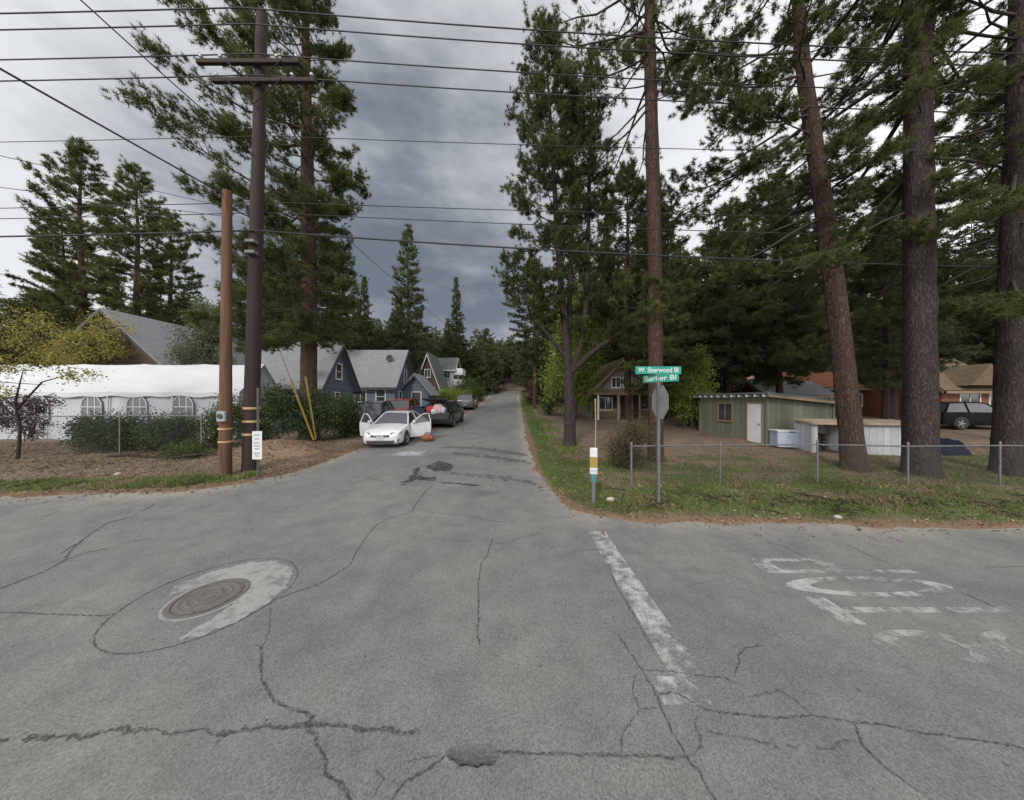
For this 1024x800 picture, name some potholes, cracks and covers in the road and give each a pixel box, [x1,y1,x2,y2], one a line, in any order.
crack [497,553,1024,800]
crack [0,484,541,800]
manhole cover [158,560,294,640]
